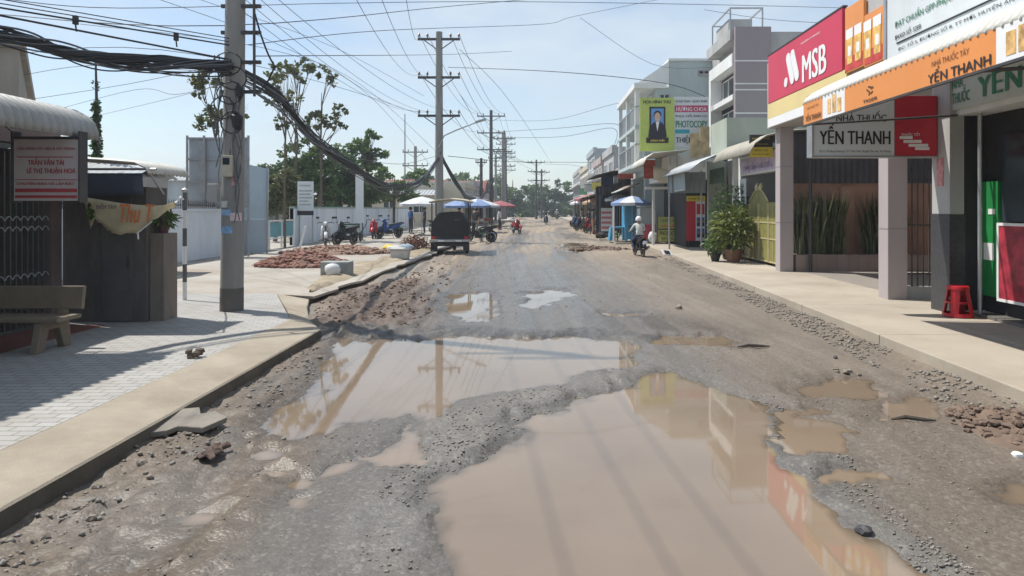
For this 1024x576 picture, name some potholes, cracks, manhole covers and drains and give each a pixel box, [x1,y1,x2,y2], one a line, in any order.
pothole [282,474,315,491]
pothole [338,420,442,476]
pothole [247,332,649,444]
pothole [517,288,578,309]
pothole [413,368,954,576]
pothole [244,447,291,461]
pothole [978,476,1024,508]
pothole [642,332,750,348]
pothole [439,290,508,322]
pothole [280,491,316,510]
pothole [309,459,368,481]
